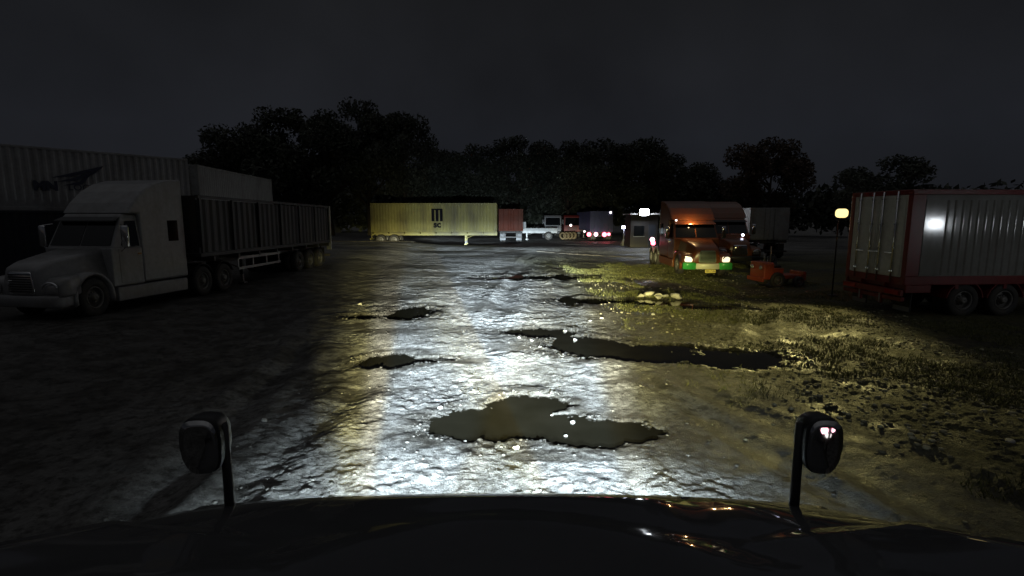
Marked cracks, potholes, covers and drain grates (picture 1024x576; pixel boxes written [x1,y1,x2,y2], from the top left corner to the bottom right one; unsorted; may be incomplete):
pothole [491,324,830,373]
pothole [535,295,764,312]
pothole [467,273,619,281]
pothole [327,302,446,322]
pothole [386,387,691,456]
pothole [343,348,467,372]
